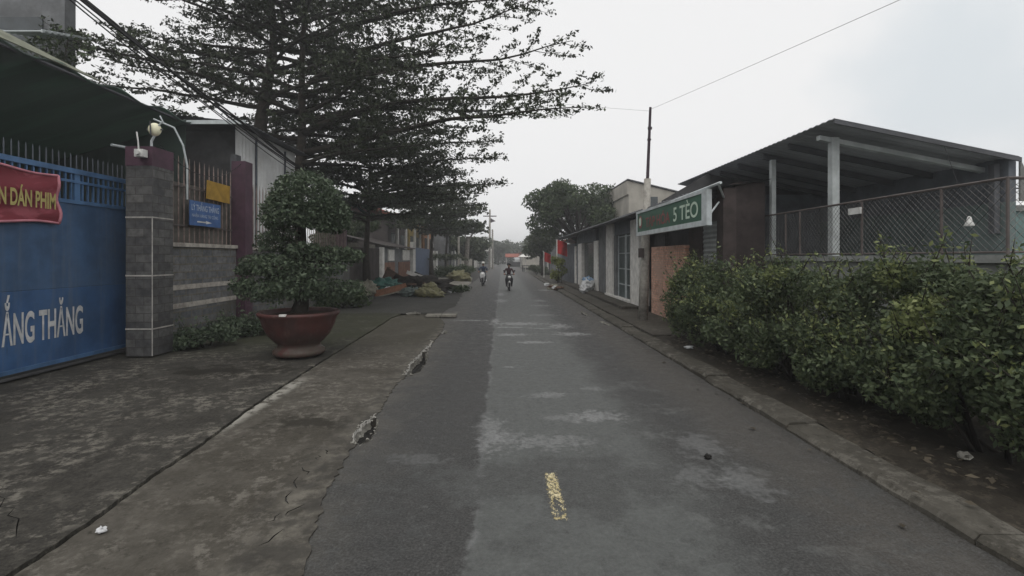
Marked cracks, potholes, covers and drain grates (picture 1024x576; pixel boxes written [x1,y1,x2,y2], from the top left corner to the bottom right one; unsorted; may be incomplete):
pothole [402,340,433,376]
crack [0,485,20,536]
pothole [350,413,379,446]
crack [261,450,328,545]
